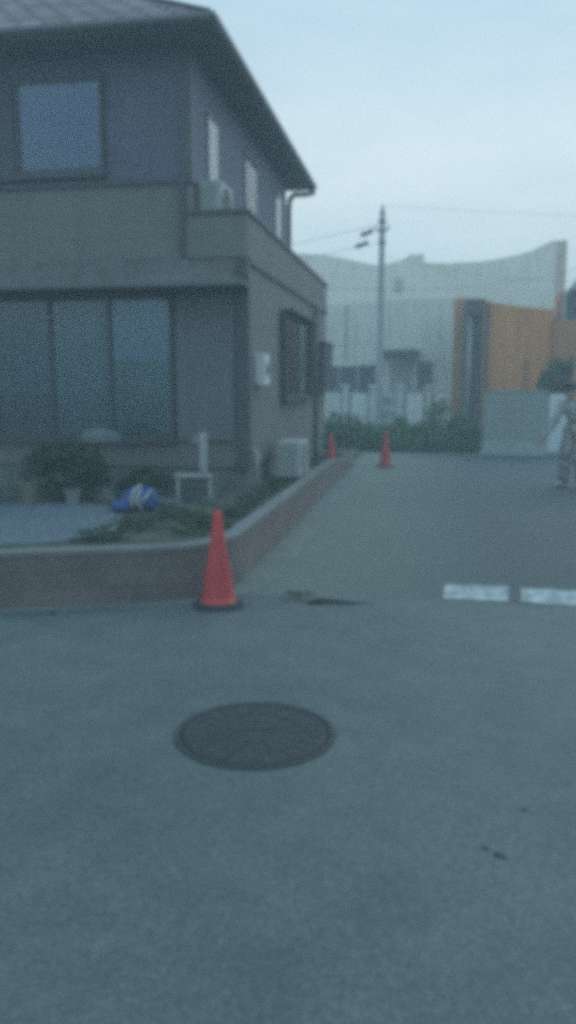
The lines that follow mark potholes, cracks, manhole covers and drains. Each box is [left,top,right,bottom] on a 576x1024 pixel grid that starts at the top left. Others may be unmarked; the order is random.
manhole cover [174,702,336,770]
